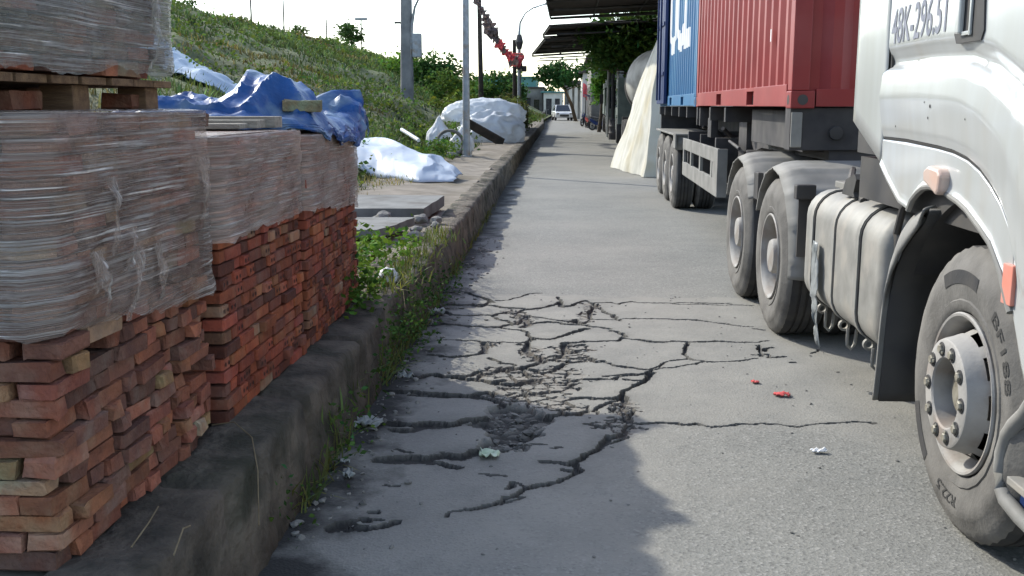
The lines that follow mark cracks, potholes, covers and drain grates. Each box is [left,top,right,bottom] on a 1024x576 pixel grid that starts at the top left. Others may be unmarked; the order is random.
crack [370,292,878,518]
crack [323,510,402,533]
pothole [472,403,557,453]
